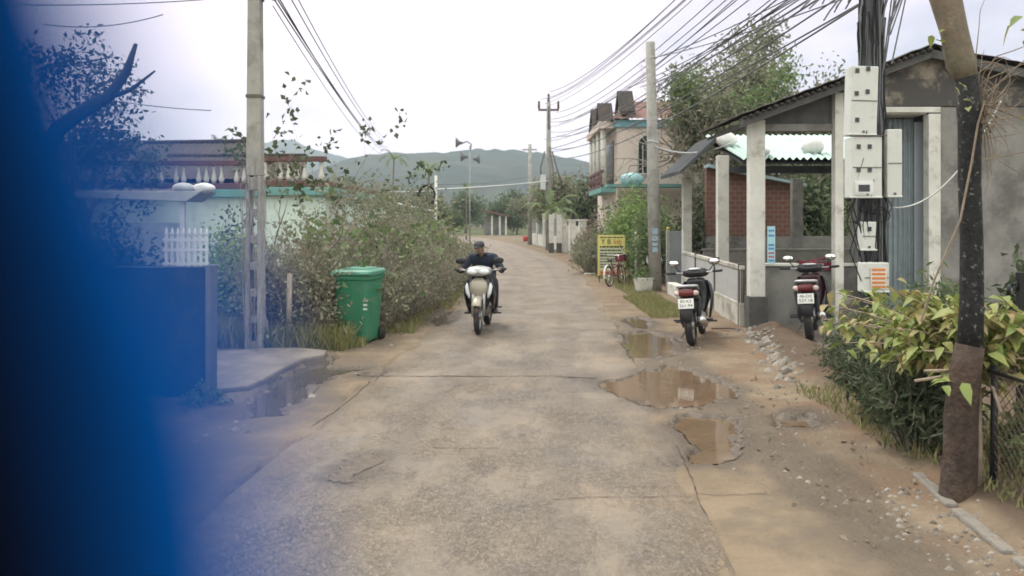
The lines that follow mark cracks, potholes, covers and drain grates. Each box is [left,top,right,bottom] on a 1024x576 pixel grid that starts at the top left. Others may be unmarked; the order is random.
pothole [669,412,744,465]
pothole [598,364,740,409]
crack [677,446,707,514]
pothole [617,316,654,329]
pothole [618,330,684,359]
pothole [248,356,373,418]
pothole [769,412,820,428]
